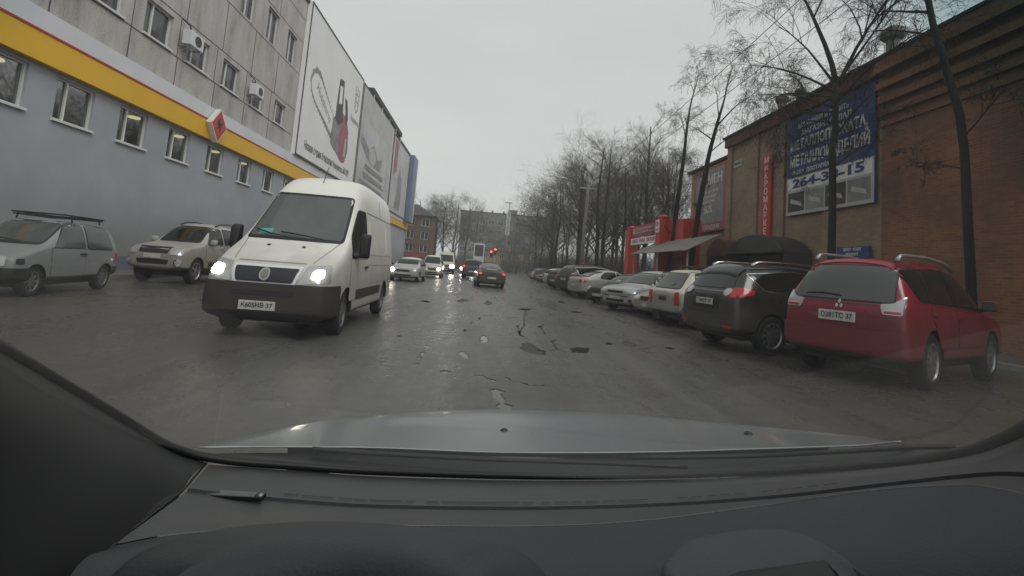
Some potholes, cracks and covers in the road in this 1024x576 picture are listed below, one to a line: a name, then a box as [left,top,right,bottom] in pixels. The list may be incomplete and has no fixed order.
crack [489,298,564,352]
pothole [520,342,547,355]
crack [474,375,513,410]
